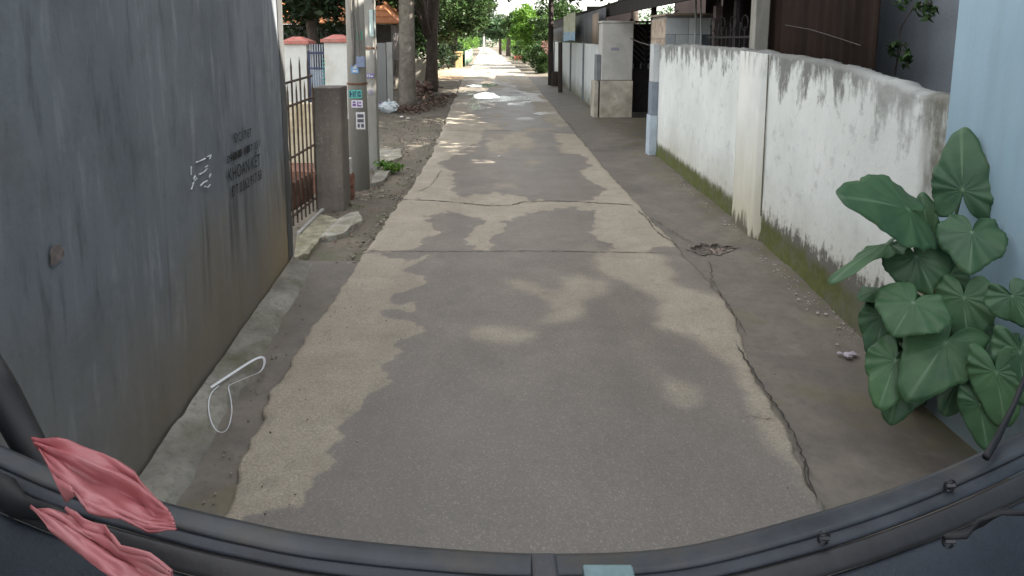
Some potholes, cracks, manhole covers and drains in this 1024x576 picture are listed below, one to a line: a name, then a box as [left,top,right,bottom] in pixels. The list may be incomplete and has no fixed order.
pothole [686,242,740,256]
crack [708,259,818,502]
